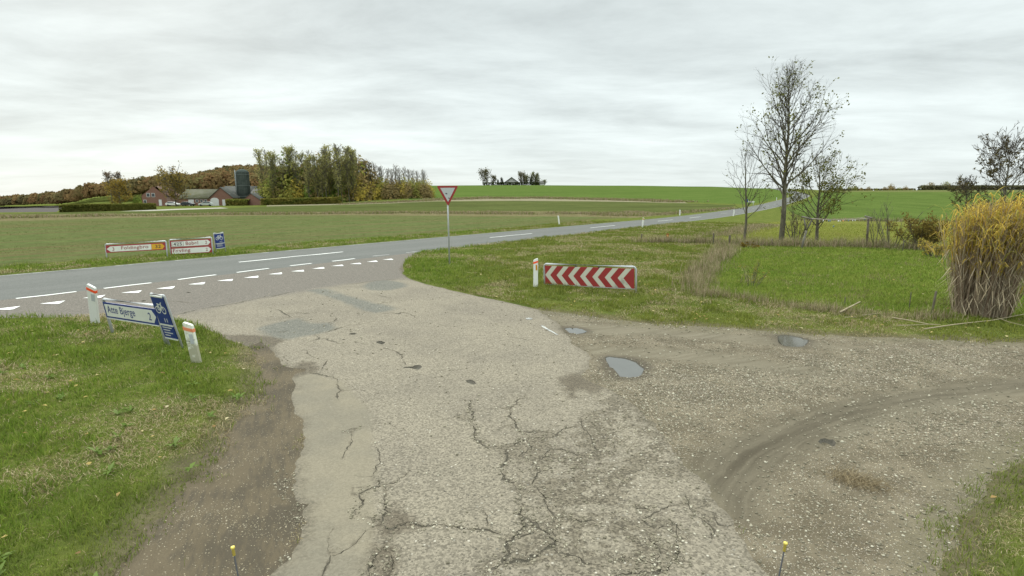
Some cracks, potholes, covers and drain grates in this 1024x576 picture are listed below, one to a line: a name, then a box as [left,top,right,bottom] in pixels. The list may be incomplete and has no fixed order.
crack [611,498,724,576]
pothole [778,335,809,347]
pothole [605,356,645,378]
crack [322,398,598,576]
